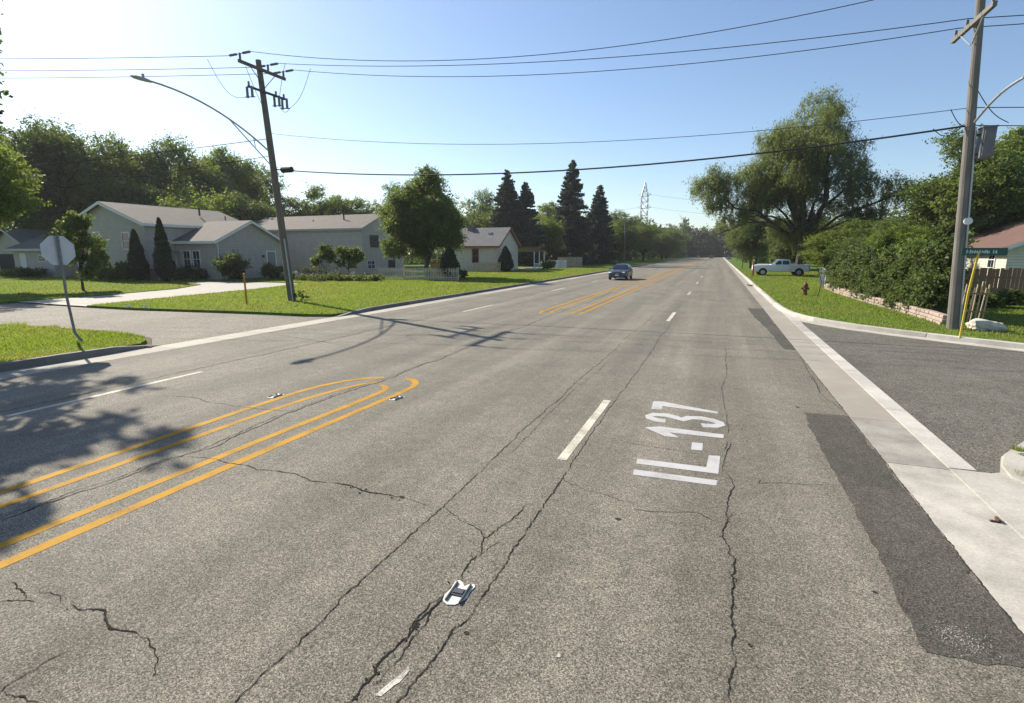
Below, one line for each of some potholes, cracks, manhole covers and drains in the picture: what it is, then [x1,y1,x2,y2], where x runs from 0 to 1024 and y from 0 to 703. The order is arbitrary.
crack [550,346,832,702]
crack [9,276,660,703]
